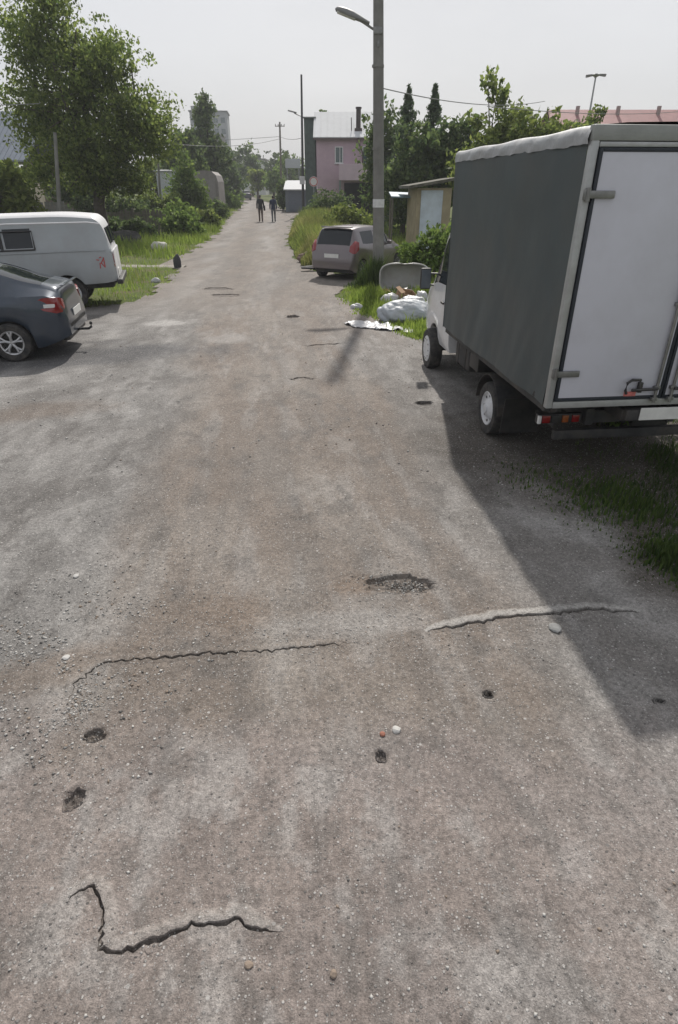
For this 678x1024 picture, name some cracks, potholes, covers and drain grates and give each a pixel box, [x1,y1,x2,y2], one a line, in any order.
pothole [346,573,446,595]
pothole [81,728,108,743]
crack [424,601,641,633]
crack [64,638,353,704]
pothole [62,786,89,813]
pothole [375,749,387,763]
crack [62,873,284,963]
